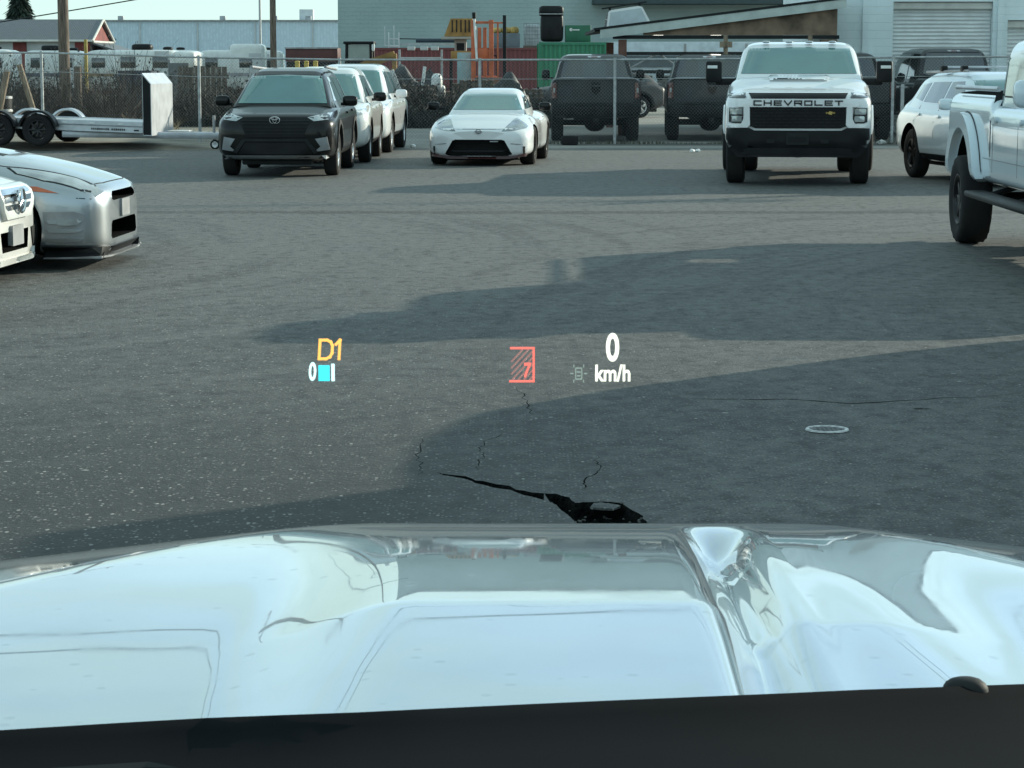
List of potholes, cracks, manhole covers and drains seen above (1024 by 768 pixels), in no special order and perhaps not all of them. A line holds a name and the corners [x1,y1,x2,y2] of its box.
crack [415,431,544,500]
manhole cover [805,425,849,433]
crack [690,394,1007,409]
